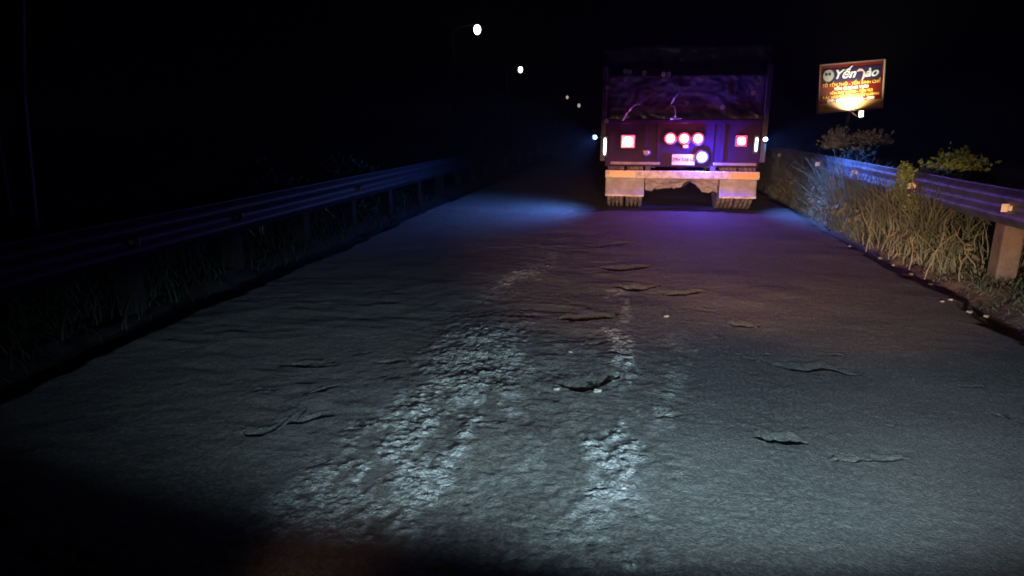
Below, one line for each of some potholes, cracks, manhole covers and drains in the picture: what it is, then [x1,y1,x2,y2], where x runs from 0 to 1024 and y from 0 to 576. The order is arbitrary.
crack [242,348,437,437]
pothole [555,367,621,392]
pothole [600,262,653,272]
pothole [614,281,661,291]
pothole [558,308,616,322]
pothole [663,288,705,296]
pothole [751,429,809,445]
pothole [724,319,758,328]
